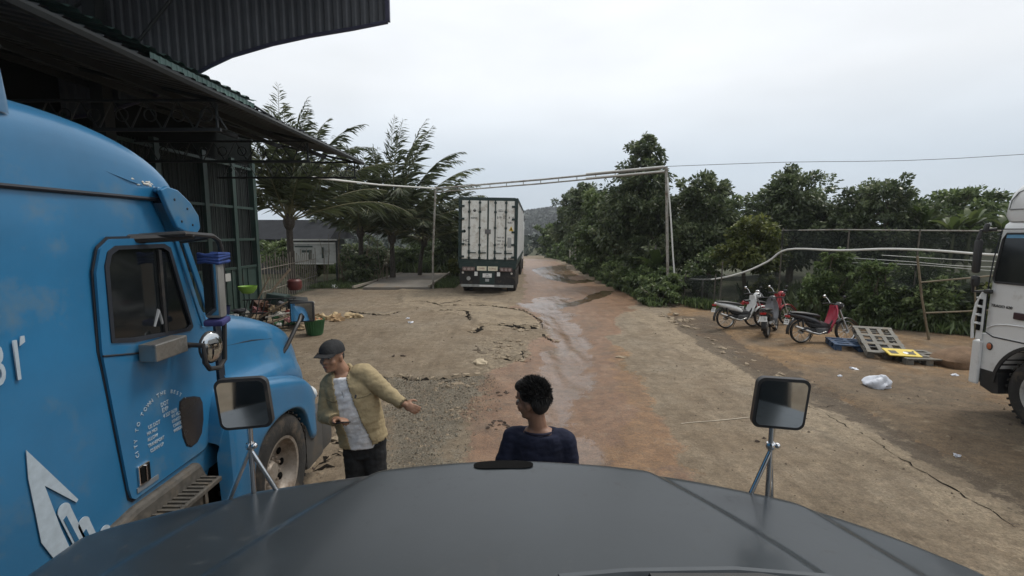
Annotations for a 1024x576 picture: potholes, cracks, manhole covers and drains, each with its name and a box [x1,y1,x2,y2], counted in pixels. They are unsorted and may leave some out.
crack [820,405,1013,526]
crack [347,300,559,361]
